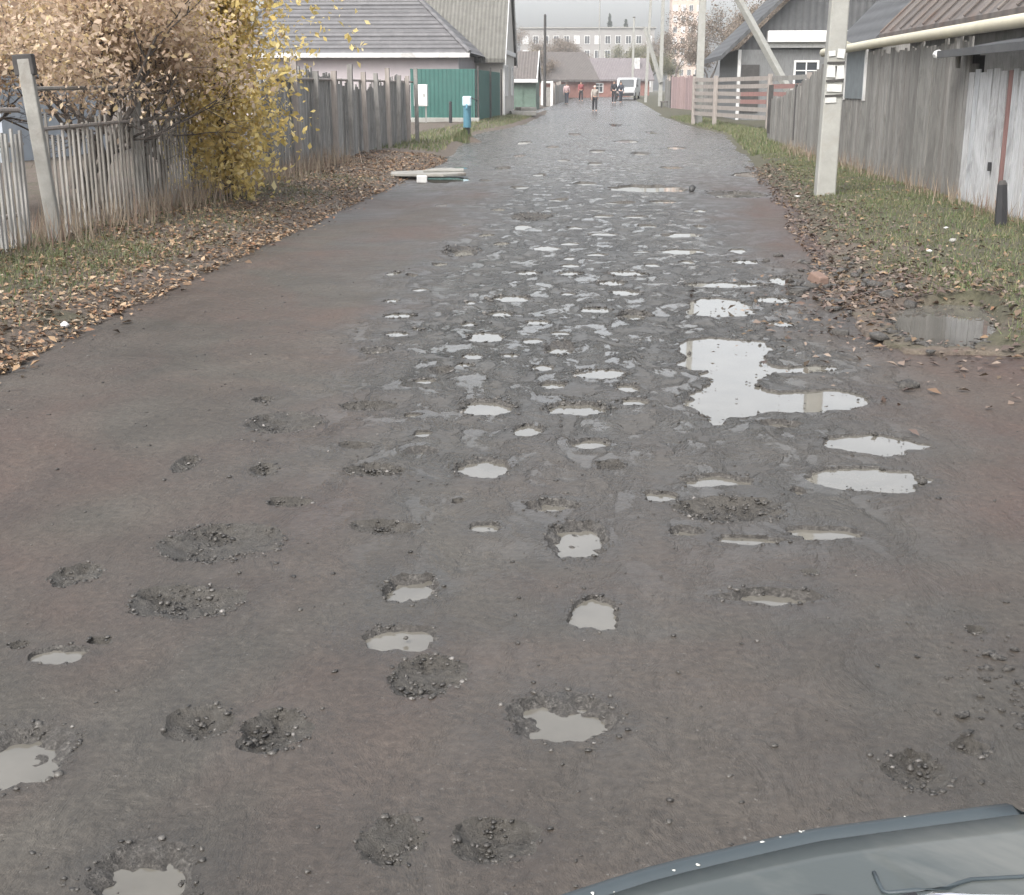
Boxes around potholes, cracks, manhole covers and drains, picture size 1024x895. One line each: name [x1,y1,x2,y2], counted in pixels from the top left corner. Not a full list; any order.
pothole [704,585,828,607]
pothole [668,334,871,425]
pothole [0,718,83,797]
pothole [160,701,237,742]
pothole [564,592,622,633]
pothole [353,812,430,868]
pothole [494,686,632,747]
pothole [816,431,937,457]
pothole [449,816,543,865]
pothole [235,706,315,756]
pothole [450,454,519,479]
pothole [540,518,614,561]
